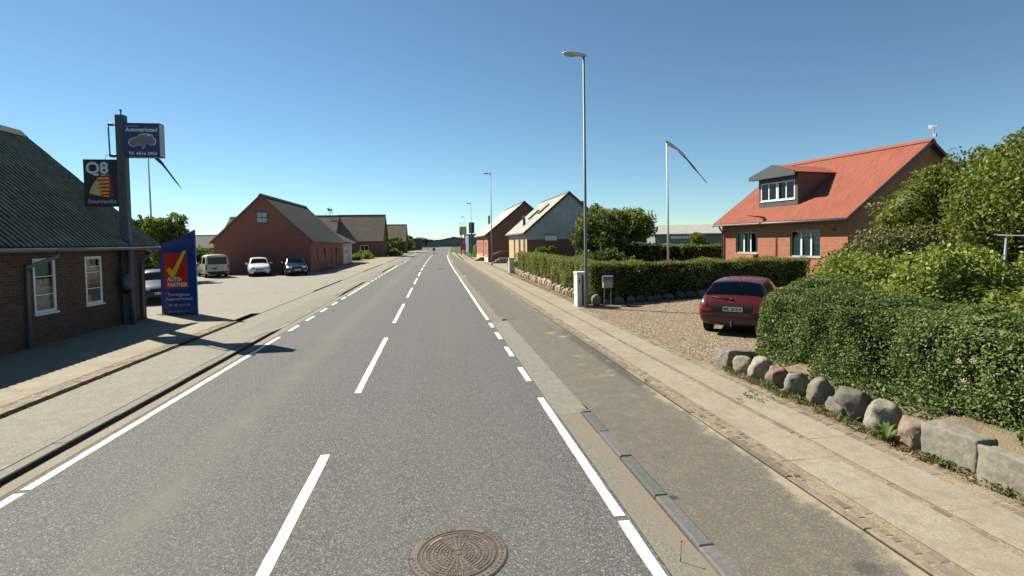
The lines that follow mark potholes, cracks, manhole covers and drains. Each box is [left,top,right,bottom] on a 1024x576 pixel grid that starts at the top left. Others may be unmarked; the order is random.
manhole cover [408,526,508,576]
